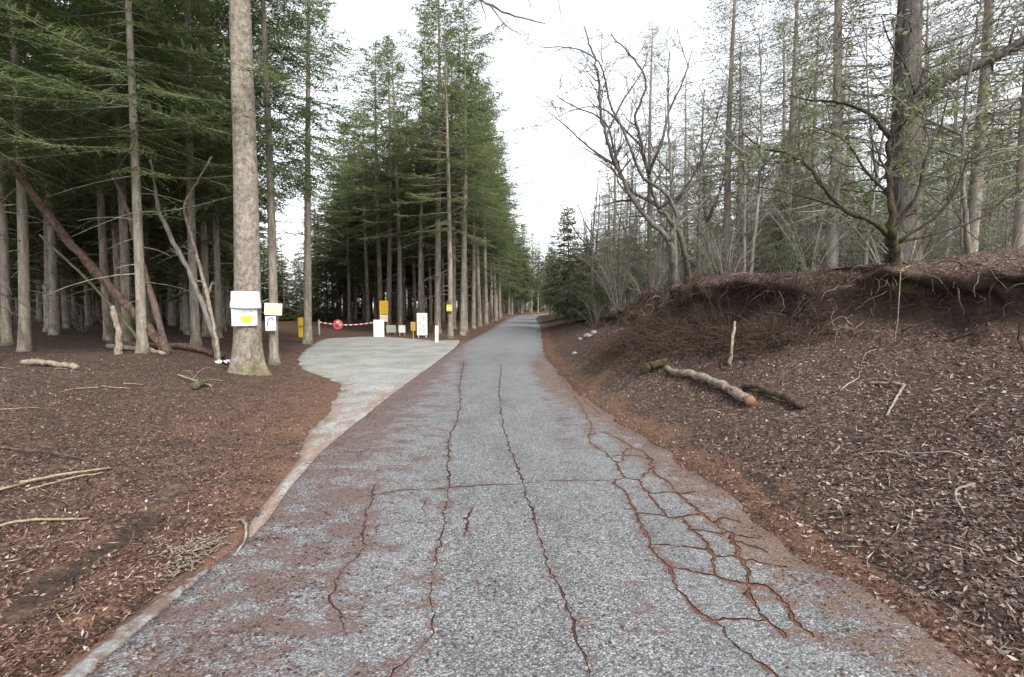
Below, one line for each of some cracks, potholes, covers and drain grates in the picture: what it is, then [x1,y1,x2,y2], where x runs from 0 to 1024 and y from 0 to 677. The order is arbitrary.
crack [323,361,814,677]
